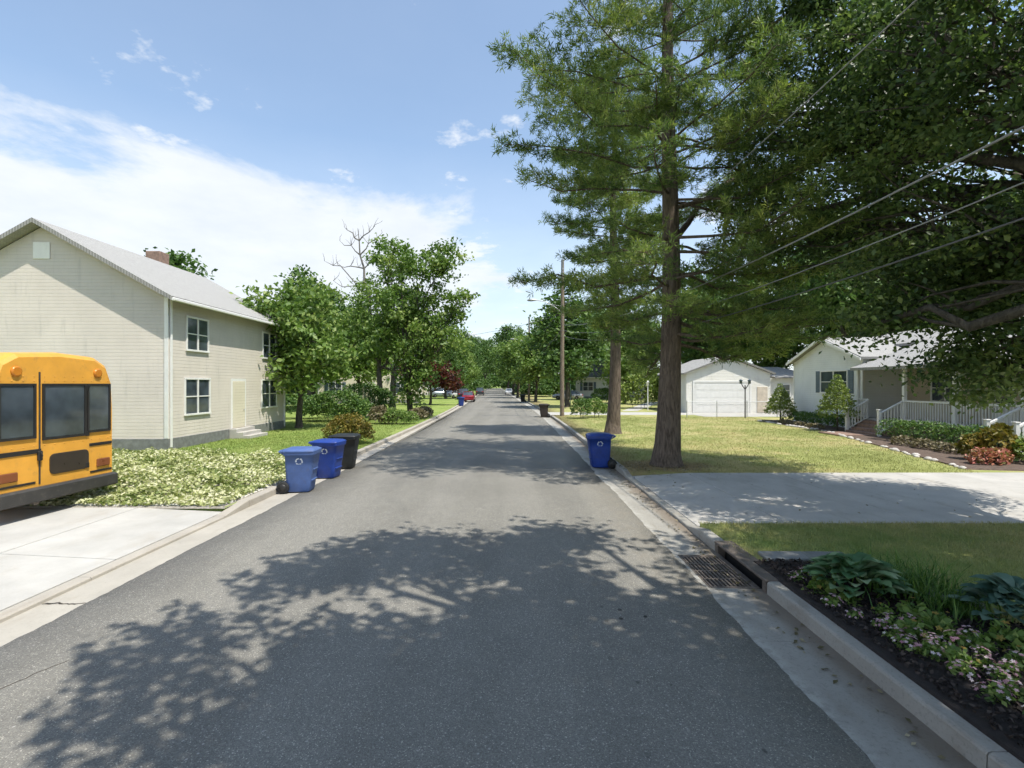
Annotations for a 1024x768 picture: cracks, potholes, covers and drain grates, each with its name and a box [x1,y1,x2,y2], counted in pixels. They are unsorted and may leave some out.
drain grate [678,541,778,594]
